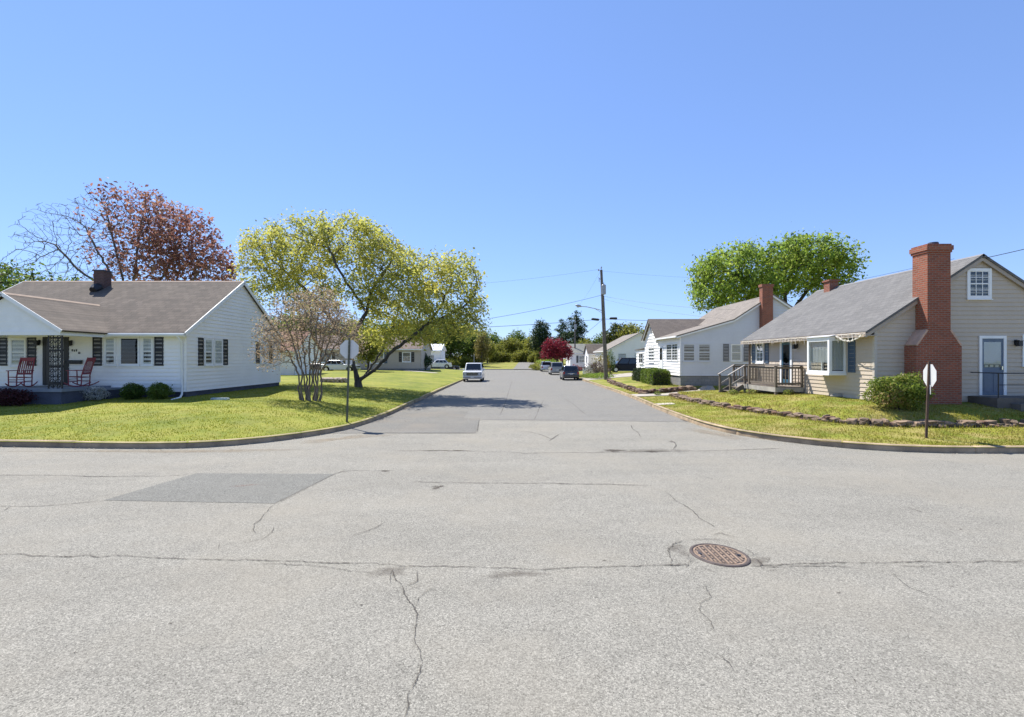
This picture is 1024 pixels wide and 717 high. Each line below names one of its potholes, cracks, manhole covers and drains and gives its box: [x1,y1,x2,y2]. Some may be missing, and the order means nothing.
crack [17,499,1015,713]
manhole cover [689,543,751,568]
